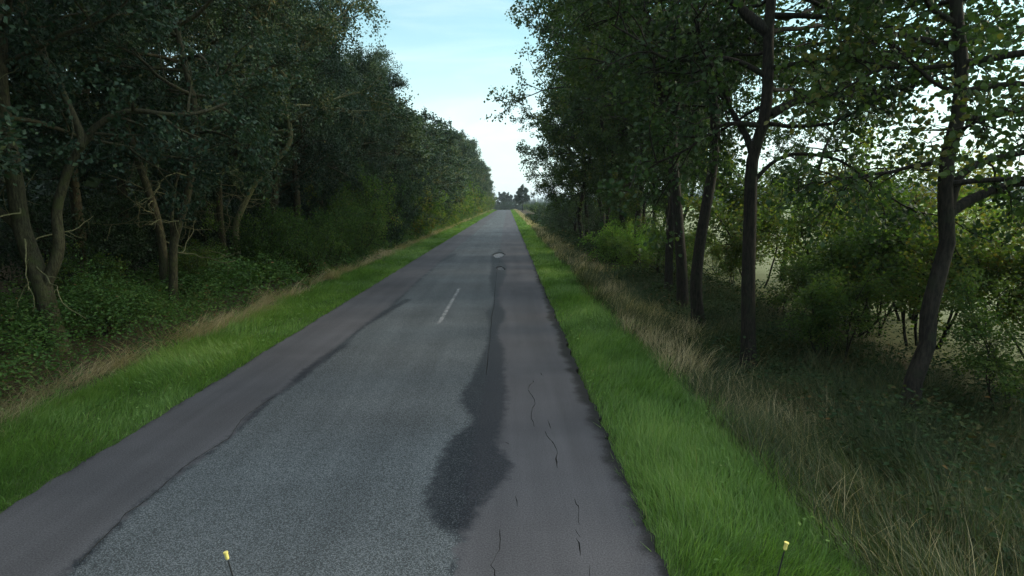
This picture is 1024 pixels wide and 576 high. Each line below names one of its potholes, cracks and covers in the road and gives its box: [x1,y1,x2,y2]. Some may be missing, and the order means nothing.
crack [528,374,558,466]
crack [575,501,590,576]
